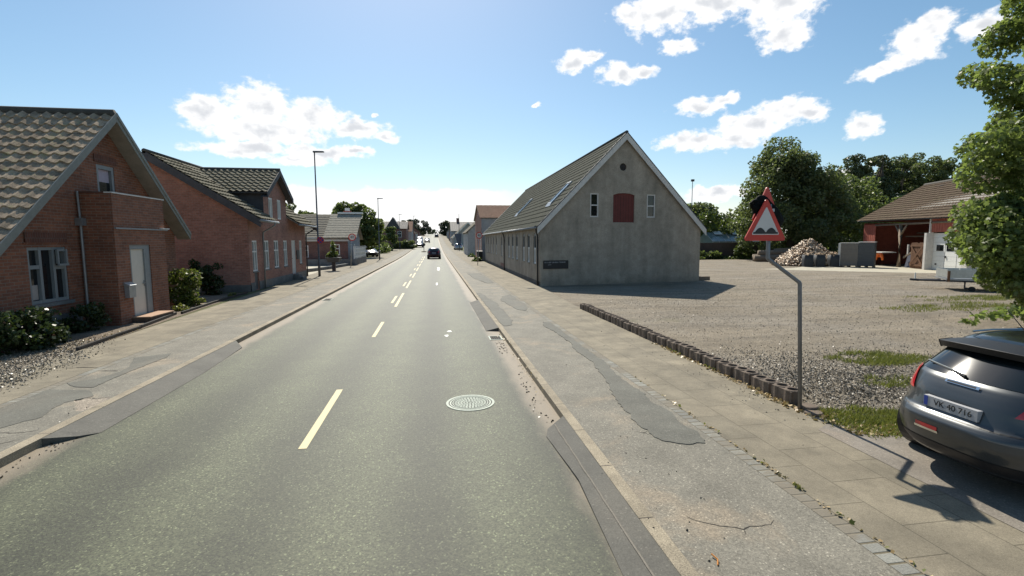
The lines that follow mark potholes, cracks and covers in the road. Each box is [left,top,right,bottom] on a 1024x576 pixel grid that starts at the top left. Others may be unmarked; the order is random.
manhole cover [446,395,495,411]
